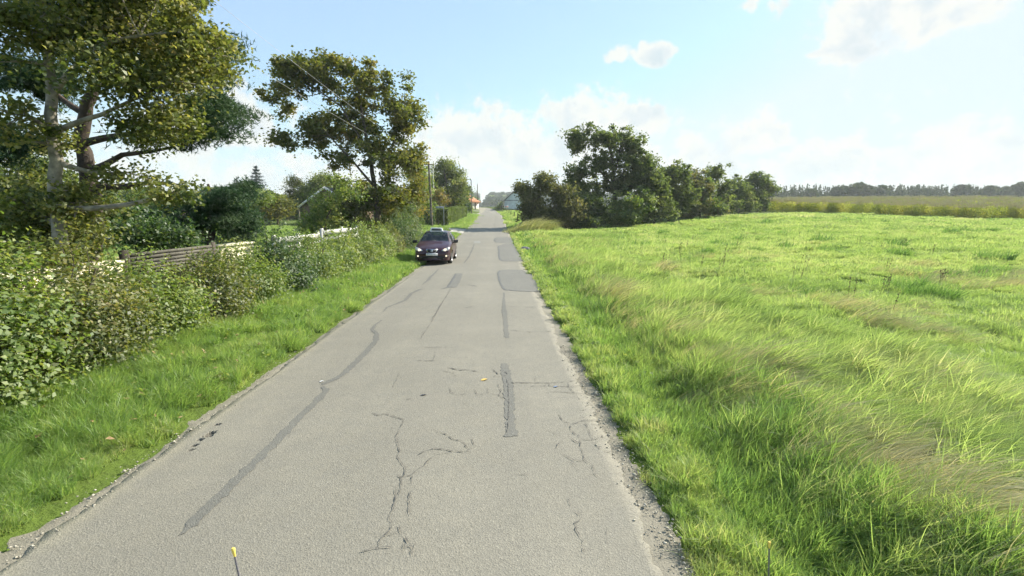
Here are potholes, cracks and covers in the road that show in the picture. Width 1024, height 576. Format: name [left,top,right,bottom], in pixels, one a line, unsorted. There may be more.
crack [362,412,475,551]
crack [423,352,659,545]
pothole [191,428,231,438]
